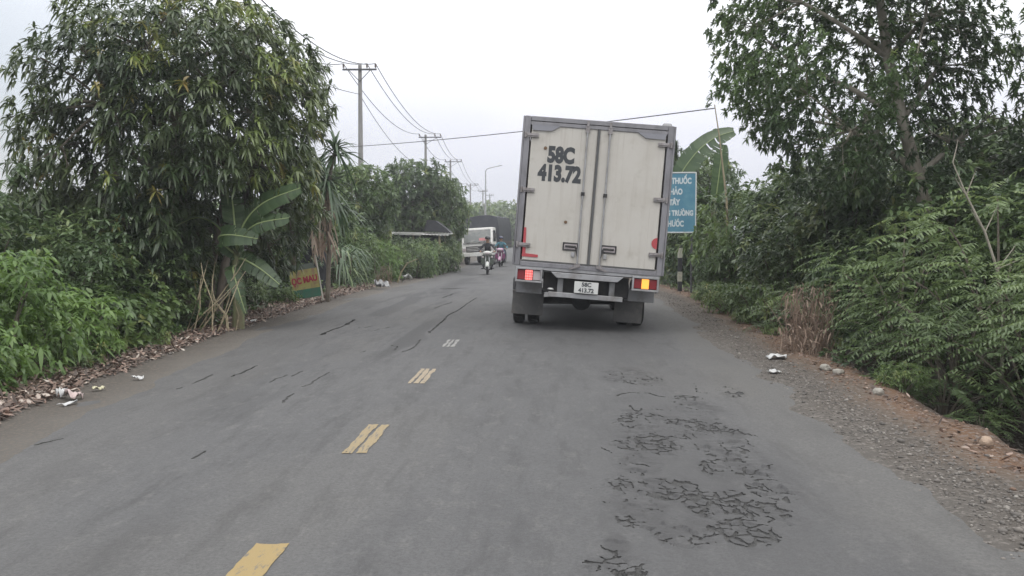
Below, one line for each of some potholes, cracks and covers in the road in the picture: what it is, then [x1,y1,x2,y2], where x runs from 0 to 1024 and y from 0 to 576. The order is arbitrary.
crack [582,373,793,576]
